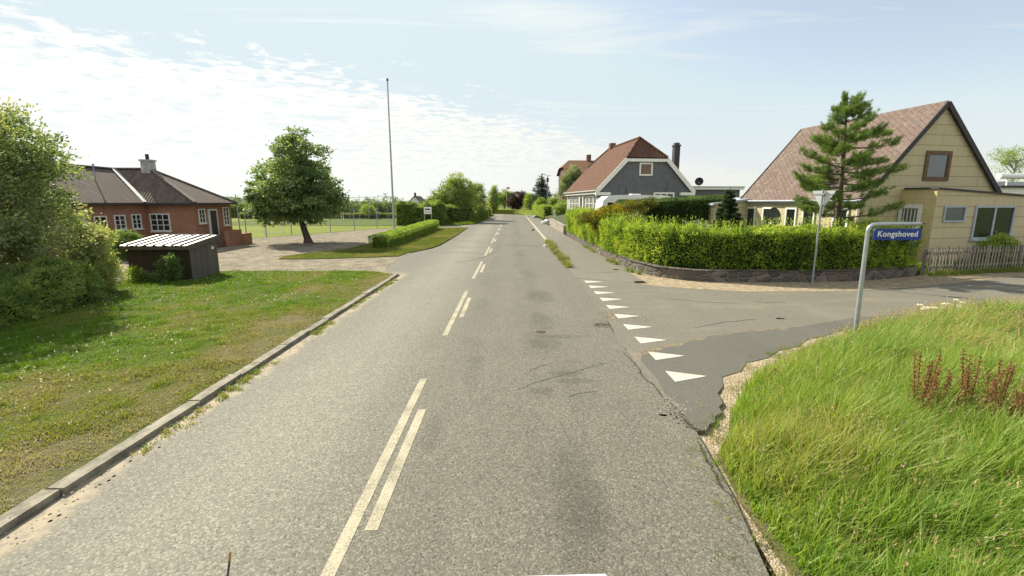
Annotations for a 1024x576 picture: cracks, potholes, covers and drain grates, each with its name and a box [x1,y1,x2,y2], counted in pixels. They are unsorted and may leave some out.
crack [694,301,785,328]
